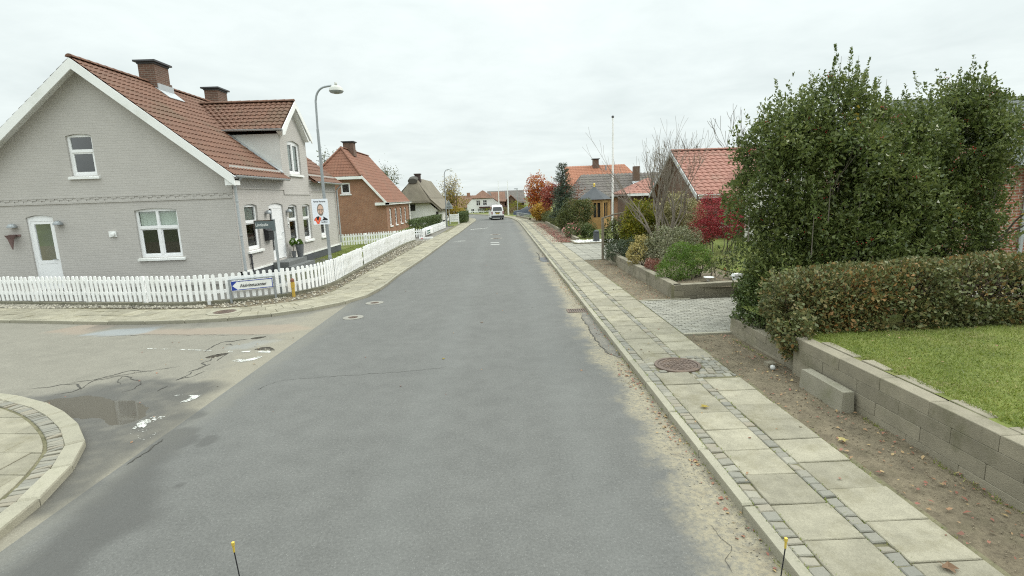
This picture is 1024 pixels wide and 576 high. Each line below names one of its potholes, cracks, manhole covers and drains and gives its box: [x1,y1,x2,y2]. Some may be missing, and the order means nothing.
manhole cover [207,308,242,316]
manhole cover [654,357,701,373]
crack [33,338,251,394]
